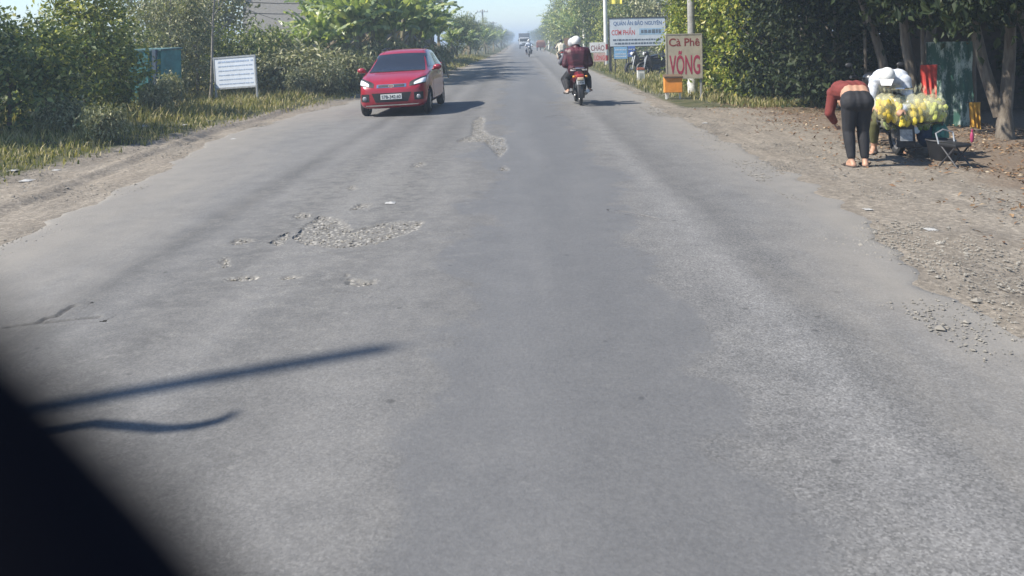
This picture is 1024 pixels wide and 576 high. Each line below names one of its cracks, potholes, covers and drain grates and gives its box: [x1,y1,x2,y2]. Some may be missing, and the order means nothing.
pothole [444,115,521,162]
pothole [255,229,301,252]
pothole [279,211,442,253]
crack [6,301,115,331]
